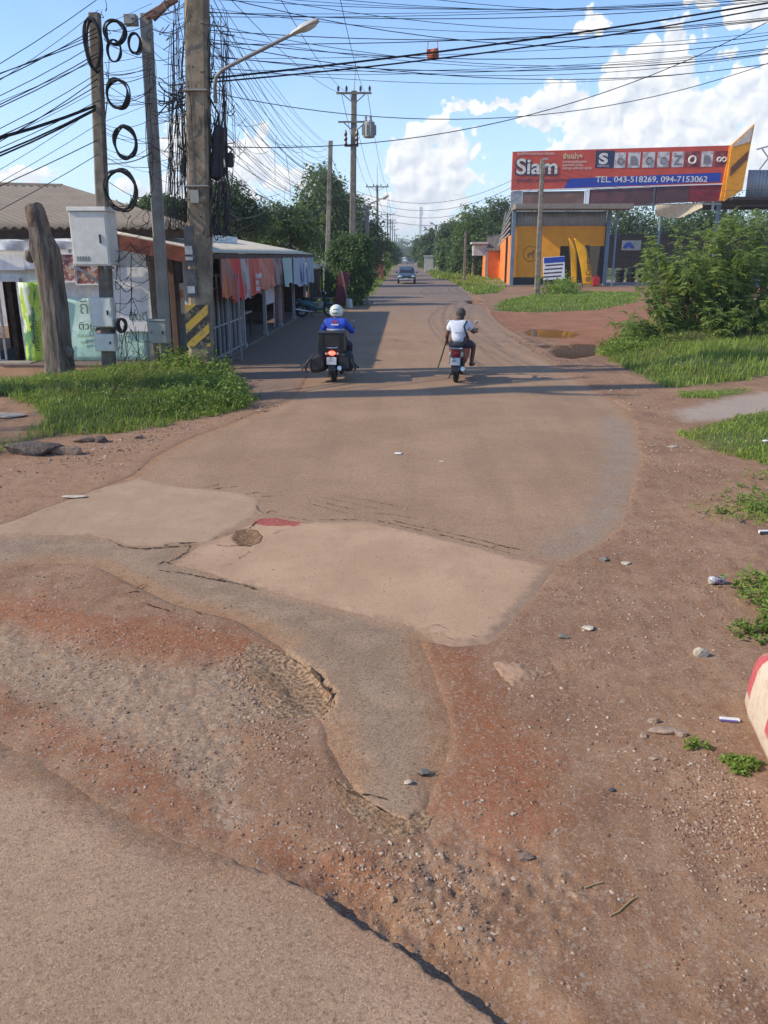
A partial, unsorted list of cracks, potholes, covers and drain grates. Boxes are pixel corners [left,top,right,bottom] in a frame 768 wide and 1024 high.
pothole [241,642,335,720]
pothole [549,343,598,359]
crack [110,484,279,614]
pothole [523,329,581,338]
